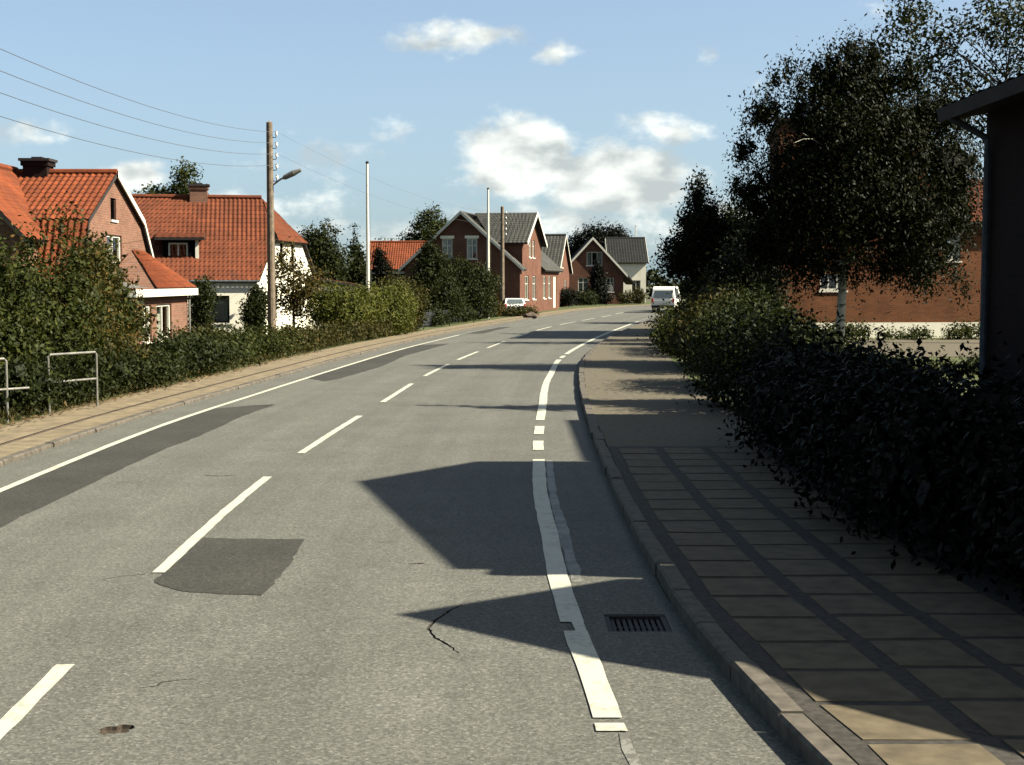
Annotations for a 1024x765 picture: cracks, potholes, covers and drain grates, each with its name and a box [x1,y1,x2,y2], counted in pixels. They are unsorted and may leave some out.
drain grate [604,615,672,632]
pothole [98,724,135,735]
crack [426,605,461,653]
